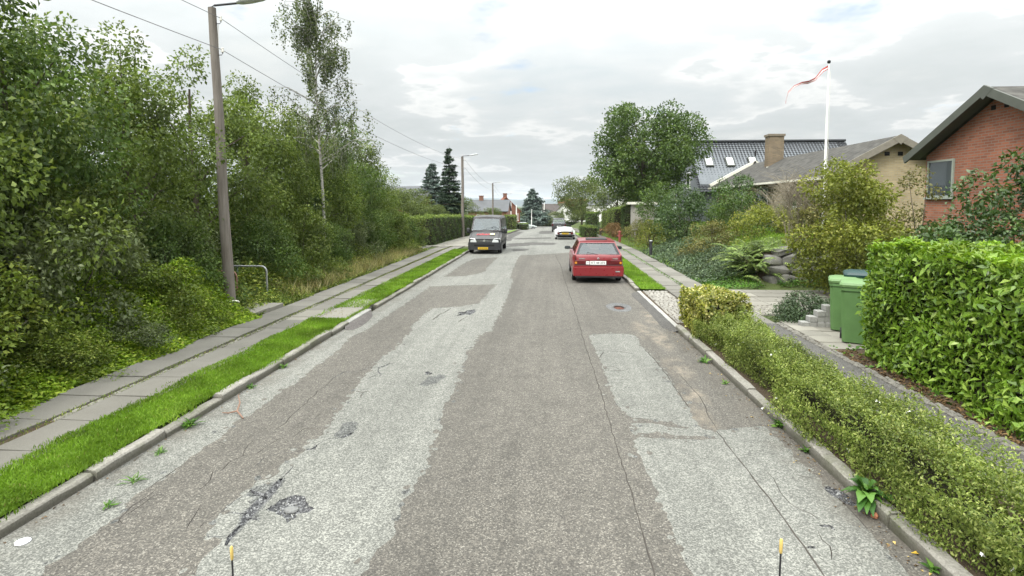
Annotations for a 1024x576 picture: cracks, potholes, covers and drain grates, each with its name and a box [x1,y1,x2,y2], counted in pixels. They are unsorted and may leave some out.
crack [186,363,390,546]
pothole [266,495,314,523]
crack [107,468,177,527]
manhole cover [606,303,632,312]
crack [772,474,867,560]
